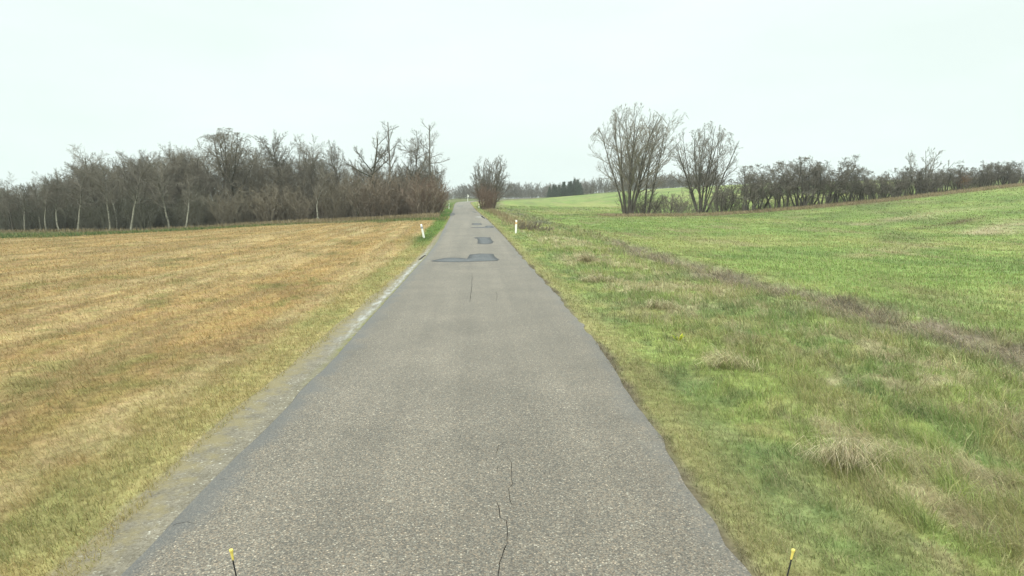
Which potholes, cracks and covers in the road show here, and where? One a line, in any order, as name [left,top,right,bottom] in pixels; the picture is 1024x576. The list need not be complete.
crack [496,445,513,576]
